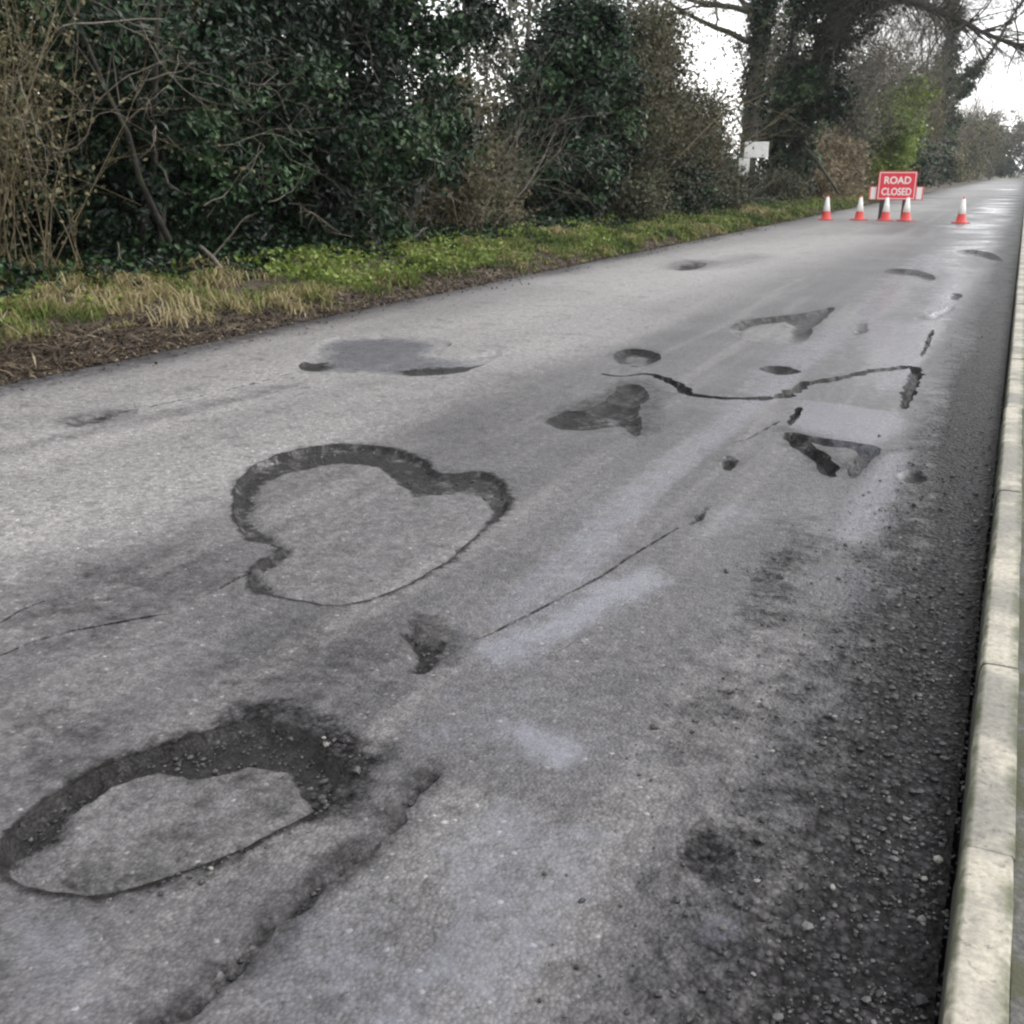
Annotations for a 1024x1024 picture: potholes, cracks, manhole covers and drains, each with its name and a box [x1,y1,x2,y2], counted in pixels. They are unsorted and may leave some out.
pothole [782,432,881,478]
pothole [396,625,462,675]
pothole [729,307,835,345]
pothole [953,250,1003,262]
pothole [671,261,707,271]
pothole [545,384,650,437]
pothole [613,349,661,367]
pothole [884,269,936,281]
pothole [1,720,343,896]
crack [0,601,166,656]
crack [601,330,934,443]
